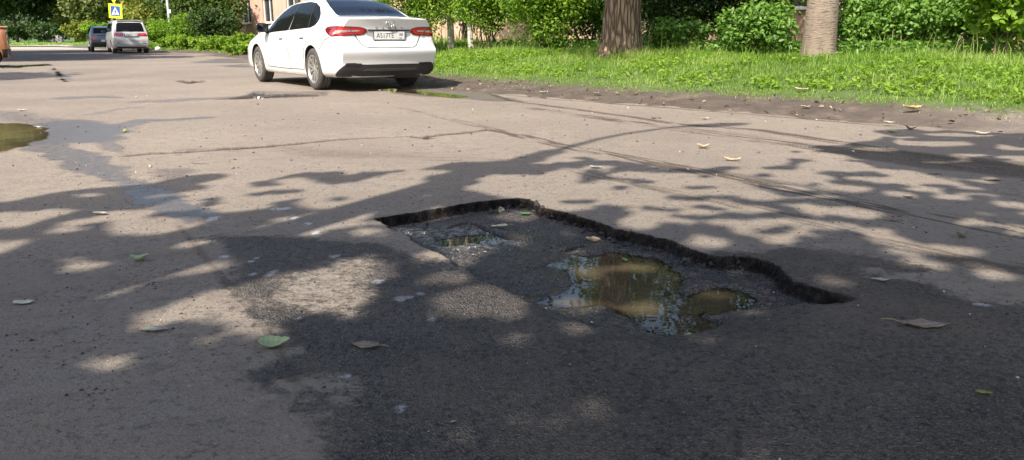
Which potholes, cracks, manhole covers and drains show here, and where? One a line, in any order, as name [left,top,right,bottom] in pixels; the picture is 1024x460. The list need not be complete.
crack [118,129,493,164]
pothole [370,197,867,352]
